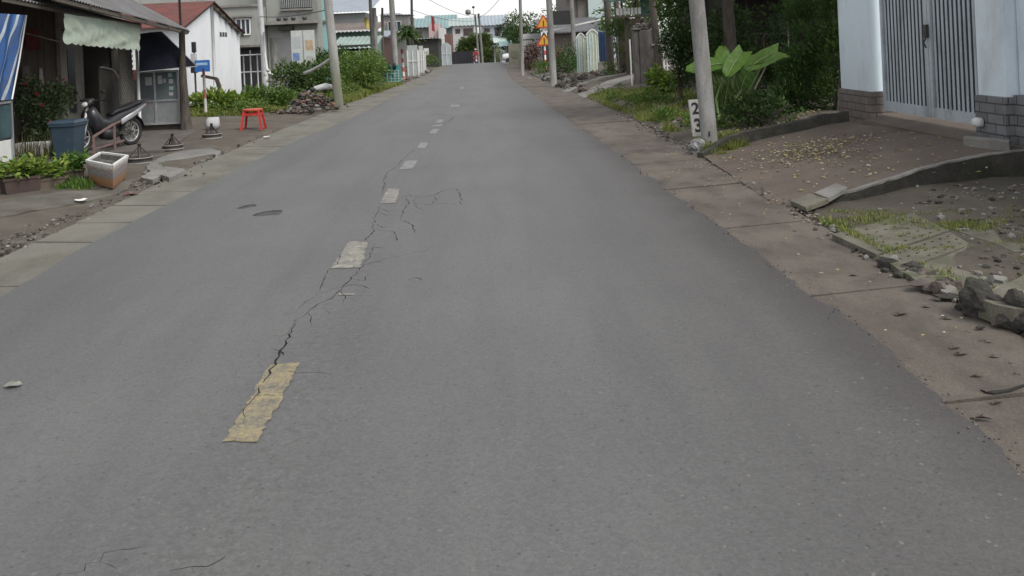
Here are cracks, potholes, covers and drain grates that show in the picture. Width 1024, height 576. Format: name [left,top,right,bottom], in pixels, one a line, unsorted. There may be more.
crack [243,189,463,415]
crack [69,546,145,574]
